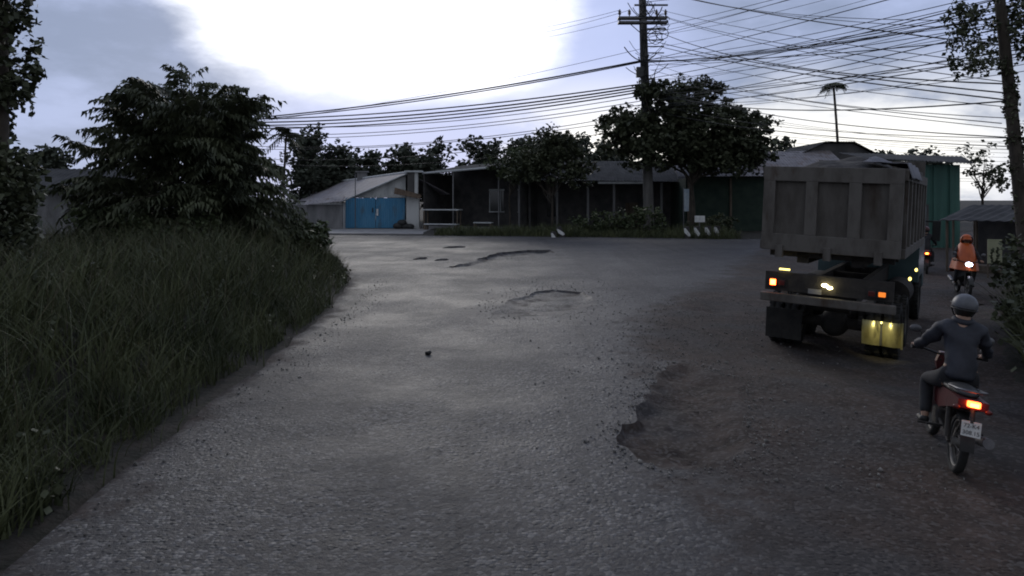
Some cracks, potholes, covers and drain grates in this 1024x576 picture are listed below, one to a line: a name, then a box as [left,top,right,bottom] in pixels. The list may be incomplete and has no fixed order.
pothole [493,289,598,317]
pothole [616,364,751,470]
pothole [449,250,555,267]
